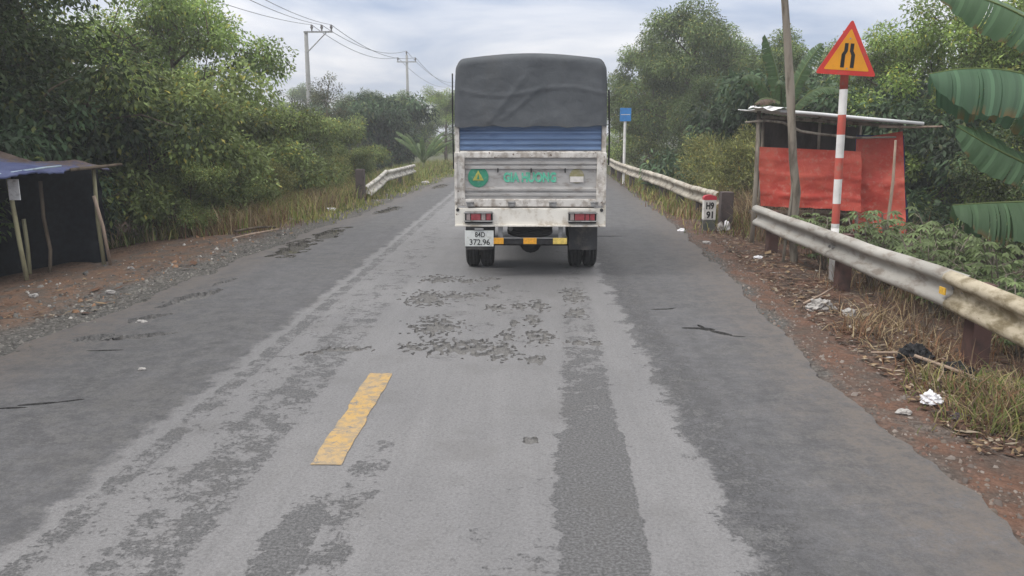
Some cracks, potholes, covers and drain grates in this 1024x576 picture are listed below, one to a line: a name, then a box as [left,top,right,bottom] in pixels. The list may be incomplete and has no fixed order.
pothole [417,274,502,291]
pothole [493,315,560,347]
pothole [484,299,551,313]
pothole [264,226,353,258]
pothole [100,332,178,341]
pothole [397,314,526,364]
pothole [558,288,589,320]
pothole [396,289,489,308]
pothole [524,355,547,365]
pothole [153,288,223,308]
crack [0,399,84,409]
